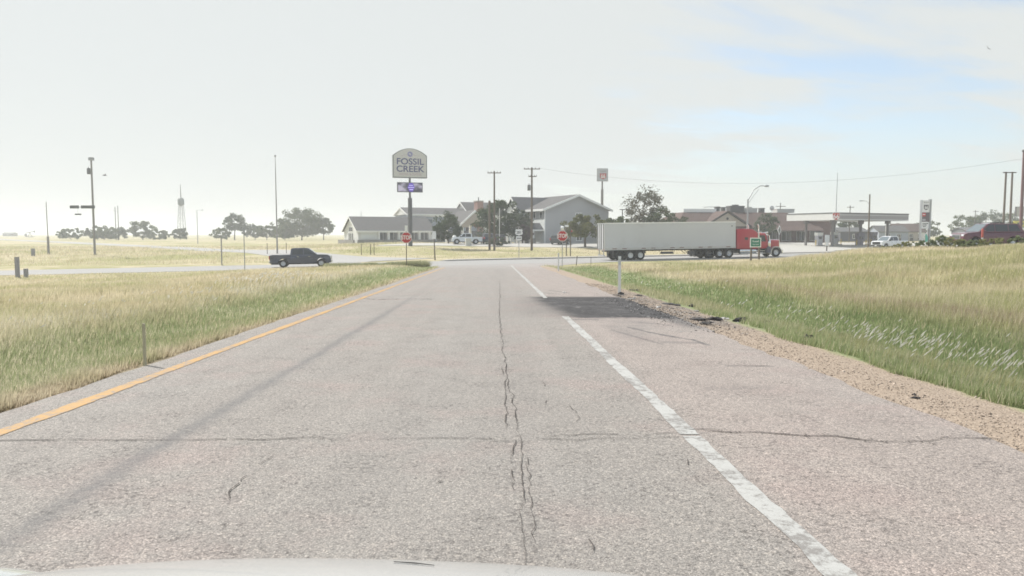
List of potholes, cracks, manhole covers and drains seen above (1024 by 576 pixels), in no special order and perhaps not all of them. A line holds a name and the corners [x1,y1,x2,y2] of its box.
crack [18,284,999,555]
